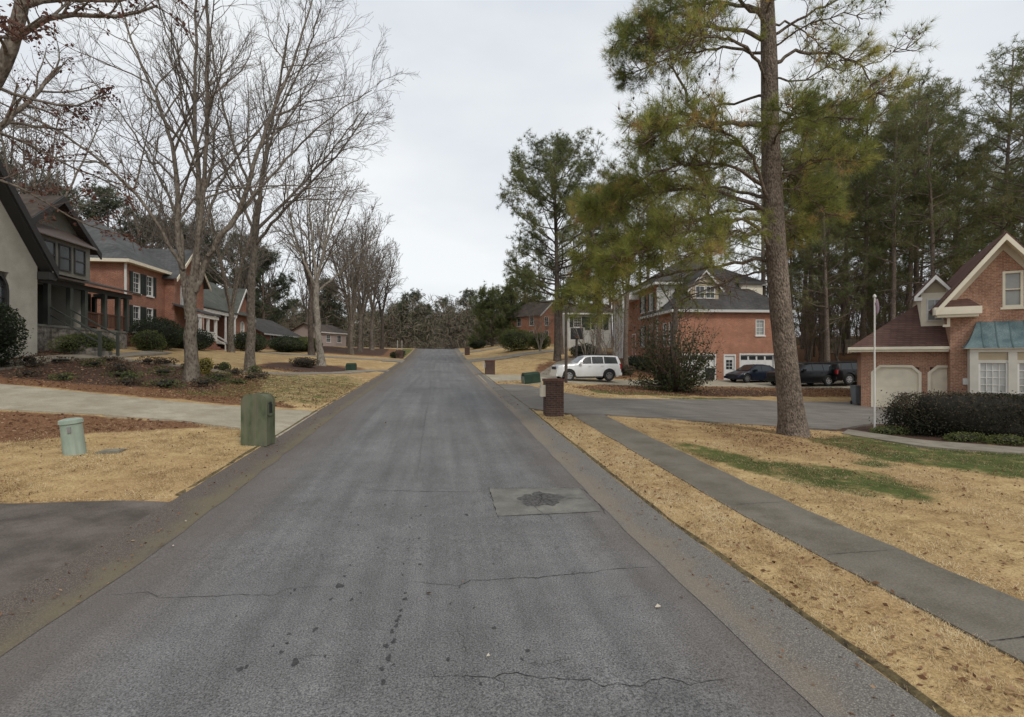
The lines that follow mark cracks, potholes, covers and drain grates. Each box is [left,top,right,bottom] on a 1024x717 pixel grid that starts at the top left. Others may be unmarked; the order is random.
crack [107,586,329,598]
crack [424,566,654,586]
crack [432,630,742,698]
